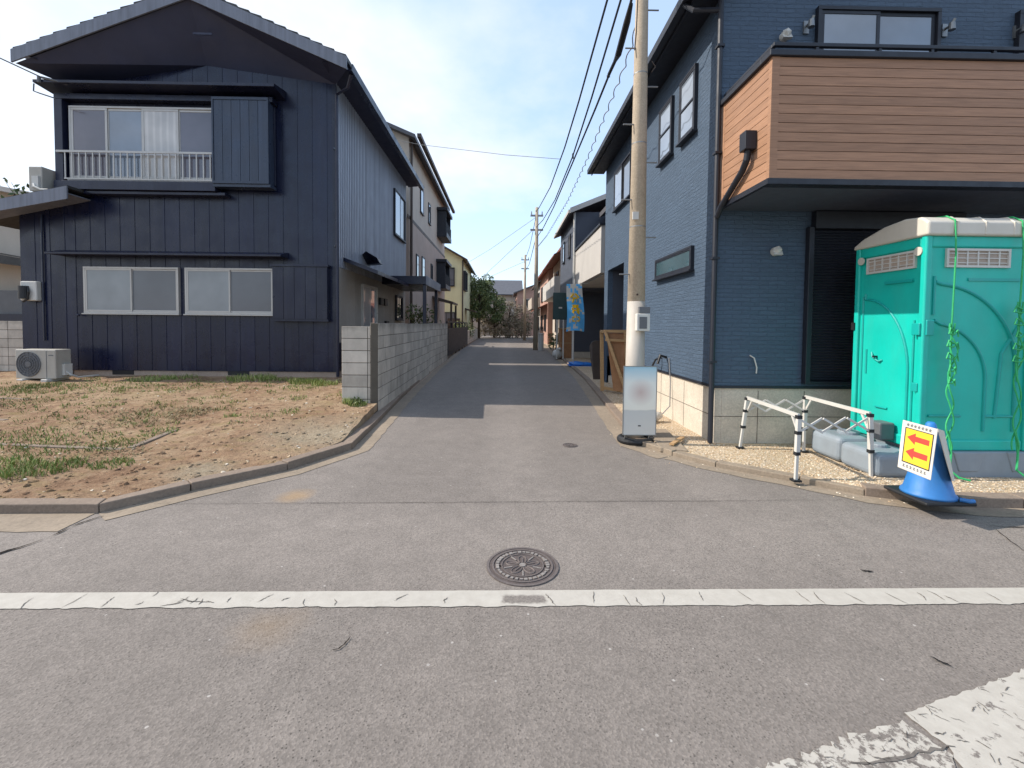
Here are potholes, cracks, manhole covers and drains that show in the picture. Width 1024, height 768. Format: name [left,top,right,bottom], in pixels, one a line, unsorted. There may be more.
crack [139,591,230,606]
manhole cover [487,547,559,587]
